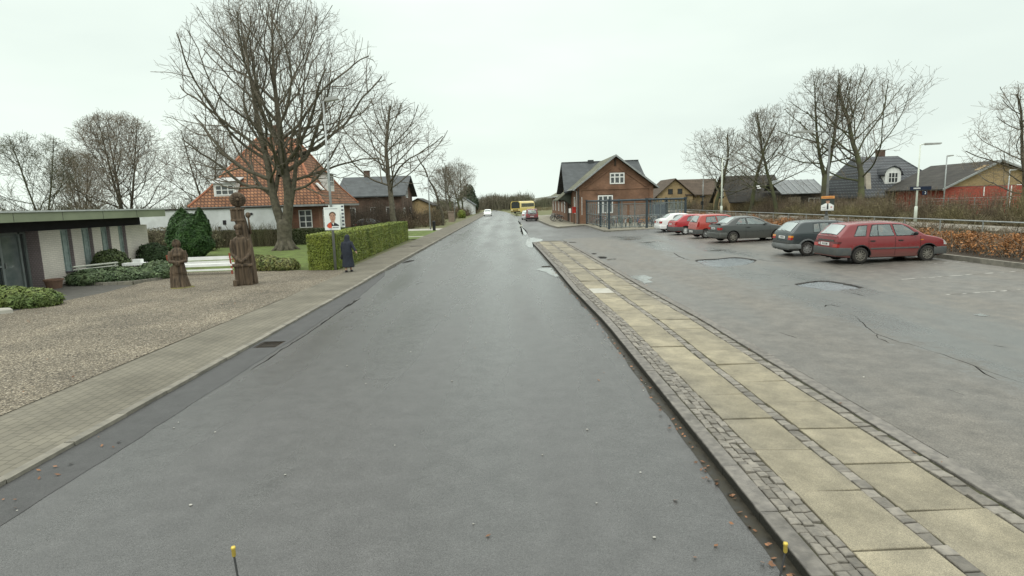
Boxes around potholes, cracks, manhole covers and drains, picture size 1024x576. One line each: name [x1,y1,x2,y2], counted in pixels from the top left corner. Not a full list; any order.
pothole [795,281,864,291]
pothole [695,257,757,267]
crack [825,293,1019,382]
